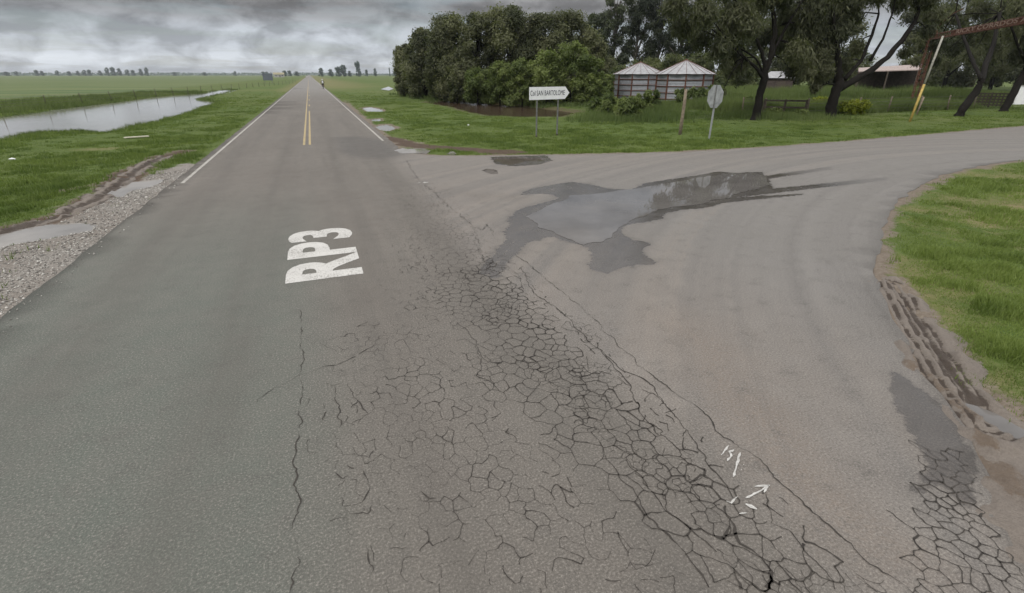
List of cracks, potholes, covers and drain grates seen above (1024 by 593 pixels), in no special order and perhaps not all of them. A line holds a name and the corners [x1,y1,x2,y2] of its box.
crack [306,176,1023,593]
